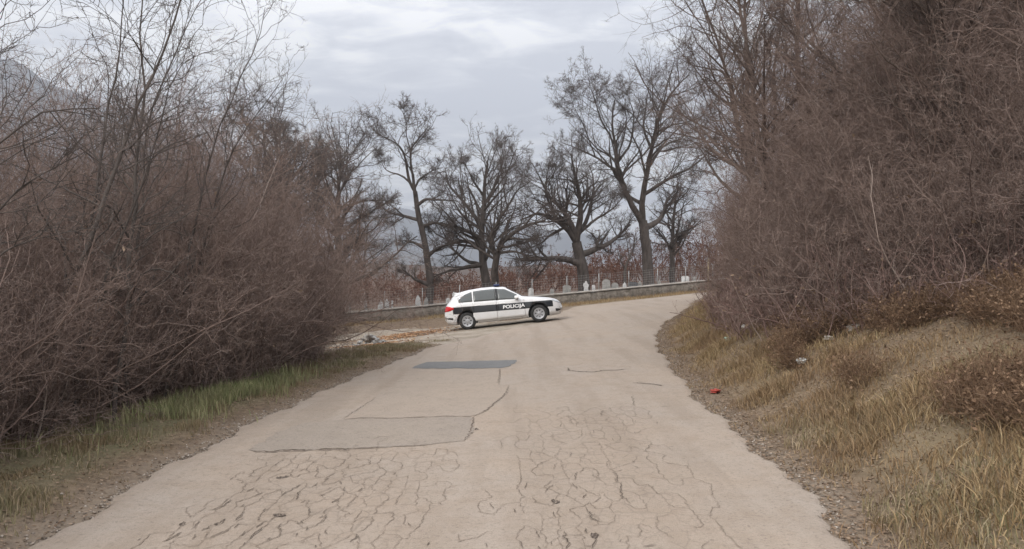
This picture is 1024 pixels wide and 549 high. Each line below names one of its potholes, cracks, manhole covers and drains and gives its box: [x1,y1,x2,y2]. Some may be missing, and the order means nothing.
crack [130,368,760,549]
